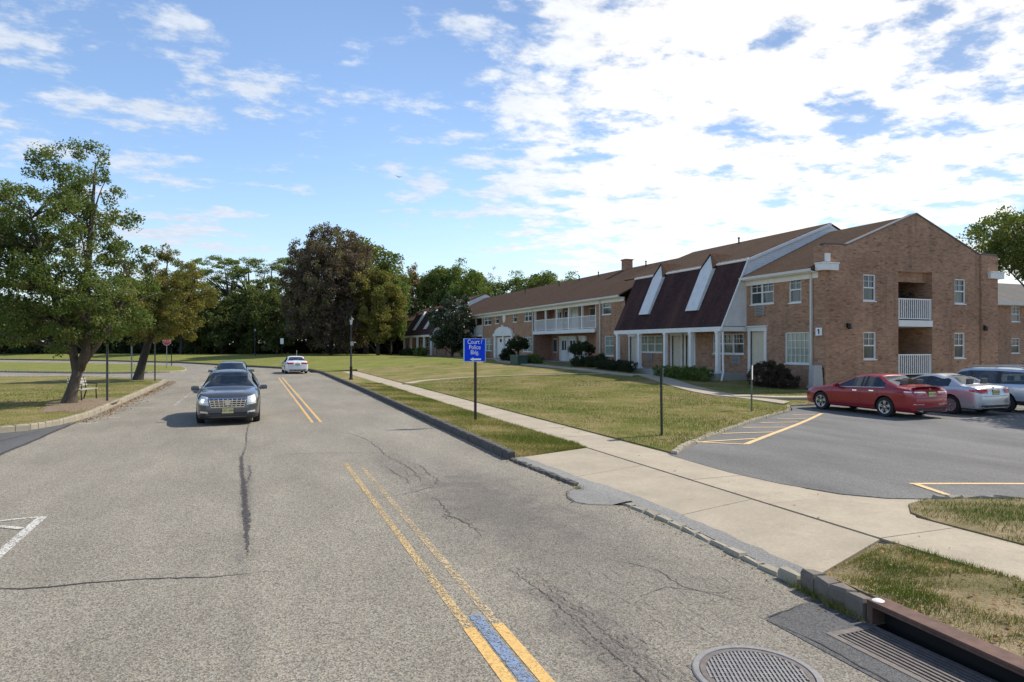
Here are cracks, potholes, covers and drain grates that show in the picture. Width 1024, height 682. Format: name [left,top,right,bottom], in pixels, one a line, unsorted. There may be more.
drain grate [825,596,1024,682]
crack [502,563,698,682]
manhole cover [692,645,824,682]
crack [583,552,789,639]
crack [0,426,482,589]
